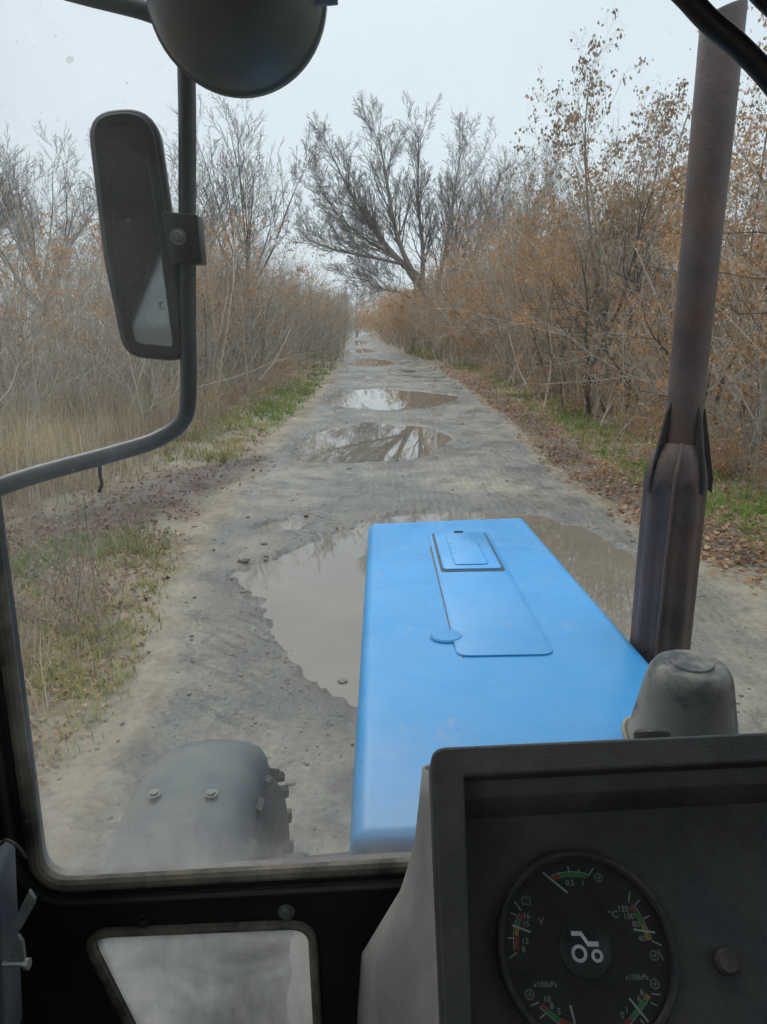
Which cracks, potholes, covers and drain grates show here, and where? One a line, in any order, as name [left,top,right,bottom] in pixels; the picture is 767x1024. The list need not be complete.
pothole [319,387,464,410]
pothole [278,420,457,464]
pothole [222,505,638,723]
pothole [345,358,399,367]
